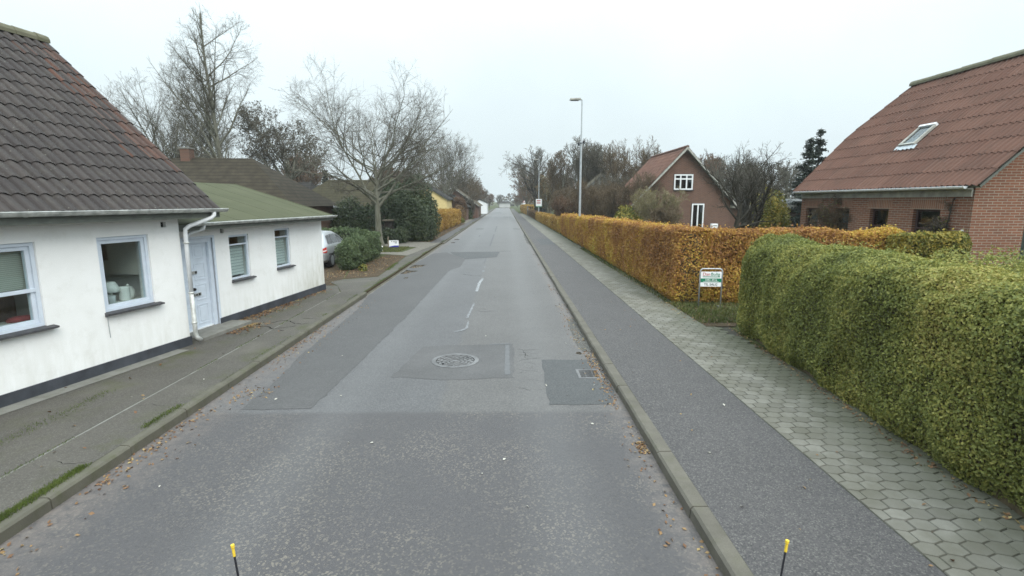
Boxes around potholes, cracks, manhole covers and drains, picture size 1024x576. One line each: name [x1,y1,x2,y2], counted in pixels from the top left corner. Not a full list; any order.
manhole cover [432,353,479,368]
drain grate [575,369,603,379]
